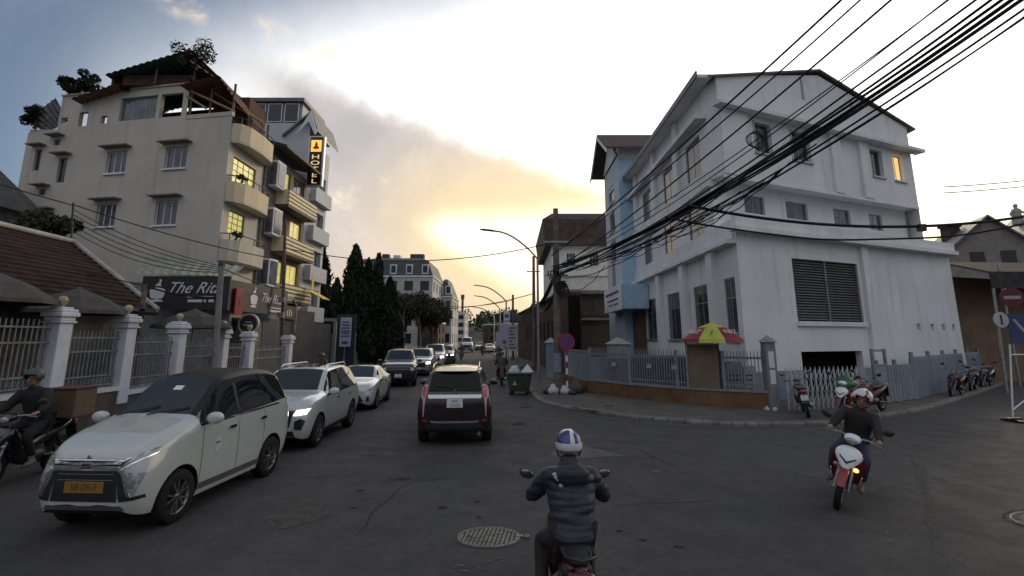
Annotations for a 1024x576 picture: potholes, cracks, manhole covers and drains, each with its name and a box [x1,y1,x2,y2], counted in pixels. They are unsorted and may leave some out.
crack [348,473,455,543]
manhole cover [454,527,530,549]
manhole cover [1005,511,1024,527]
